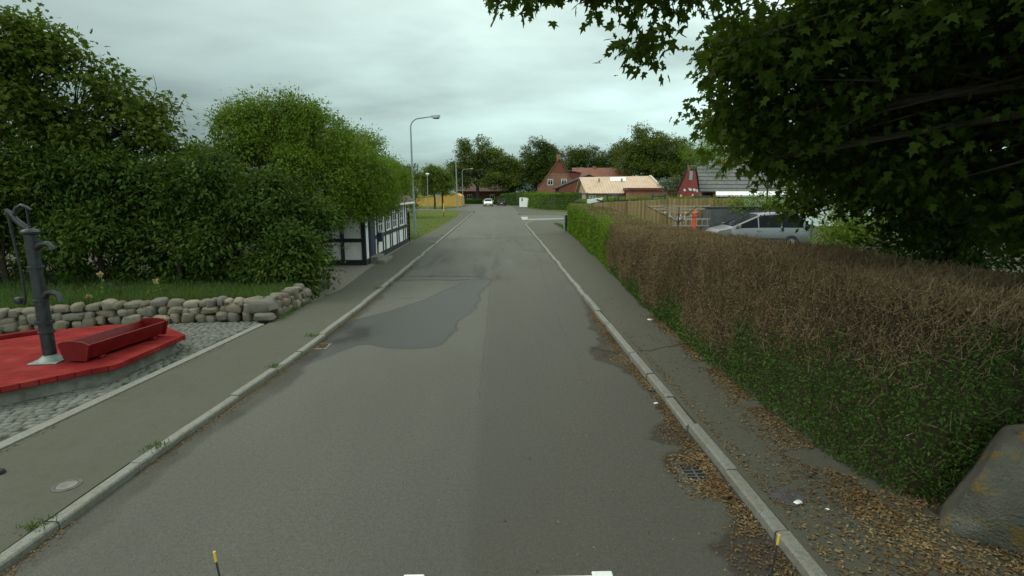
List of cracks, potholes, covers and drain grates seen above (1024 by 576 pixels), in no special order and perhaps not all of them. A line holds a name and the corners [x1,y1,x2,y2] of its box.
drain grate [671,461,721,487]
utility cover [50,478,83,493]
